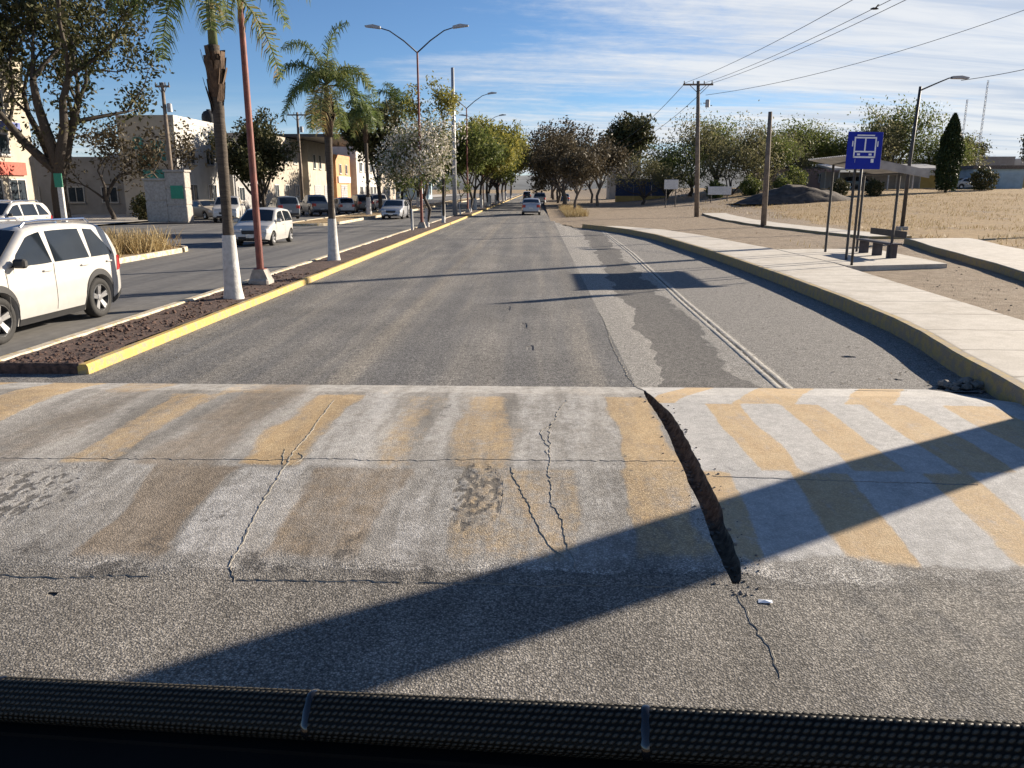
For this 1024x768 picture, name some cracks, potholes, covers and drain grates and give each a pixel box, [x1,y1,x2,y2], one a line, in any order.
crack [0,400,684,588]
pothole [0,465,84,524]
crack [737,595,780,678]
pothole [444,463,506,539]
